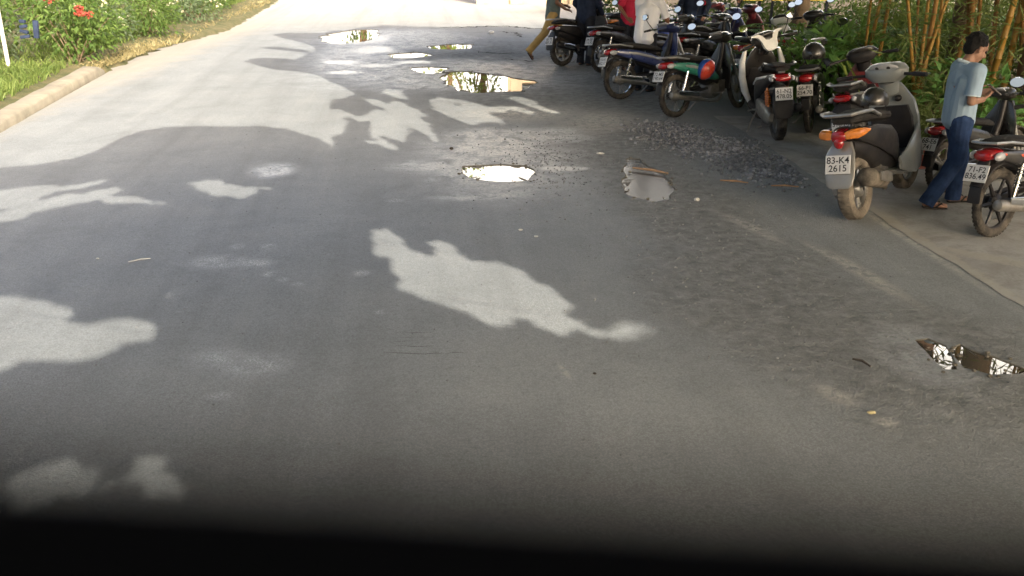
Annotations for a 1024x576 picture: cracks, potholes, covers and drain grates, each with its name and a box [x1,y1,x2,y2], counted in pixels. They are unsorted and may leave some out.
pothole [457,163,536,182]
pothole [411,66,452,74]
pothole [318,29,379,44]
pothole [616,157,677,202]
pothole [439,71,539,93]
pothole [948,344,1024,378]
